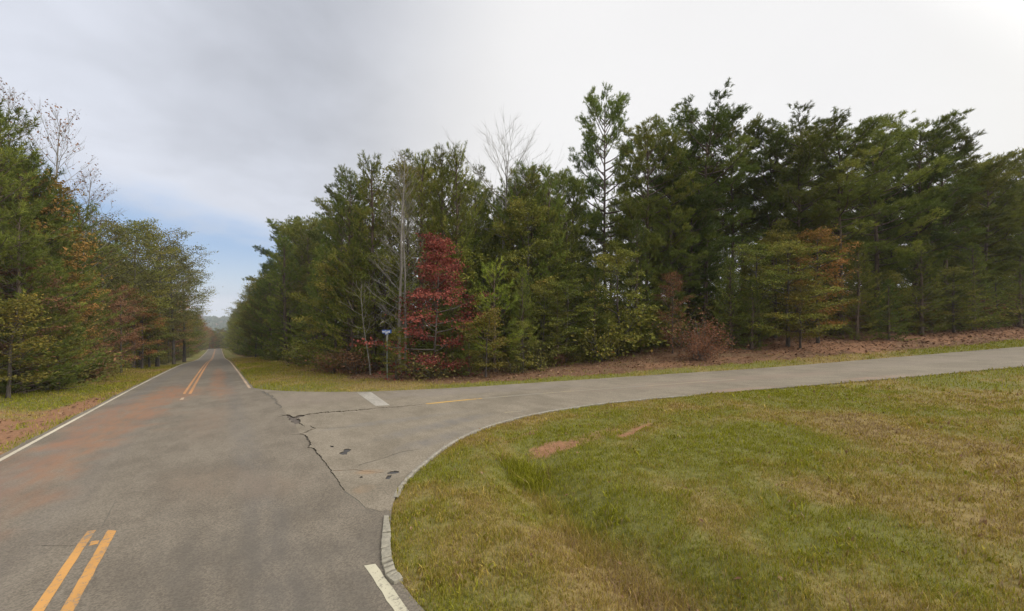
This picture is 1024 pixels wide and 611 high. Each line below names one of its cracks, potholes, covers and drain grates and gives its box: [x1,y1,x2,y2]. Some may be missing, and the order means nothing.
crack [279,404,420,510]
